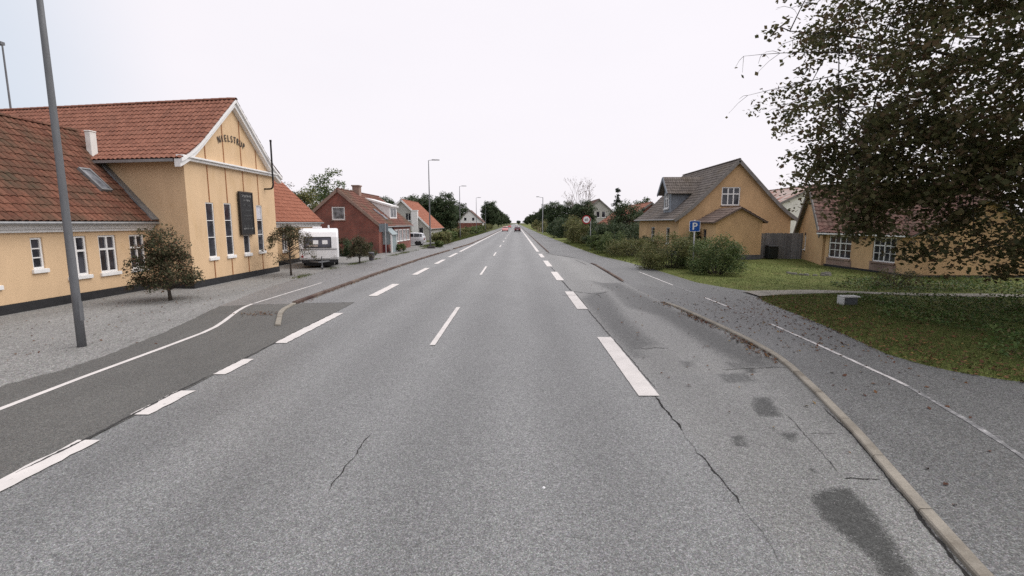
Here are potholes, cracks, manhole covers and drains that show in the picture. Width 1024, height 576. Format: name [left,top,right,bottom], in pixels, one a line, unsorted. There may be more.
crack [655,396,778,559]
